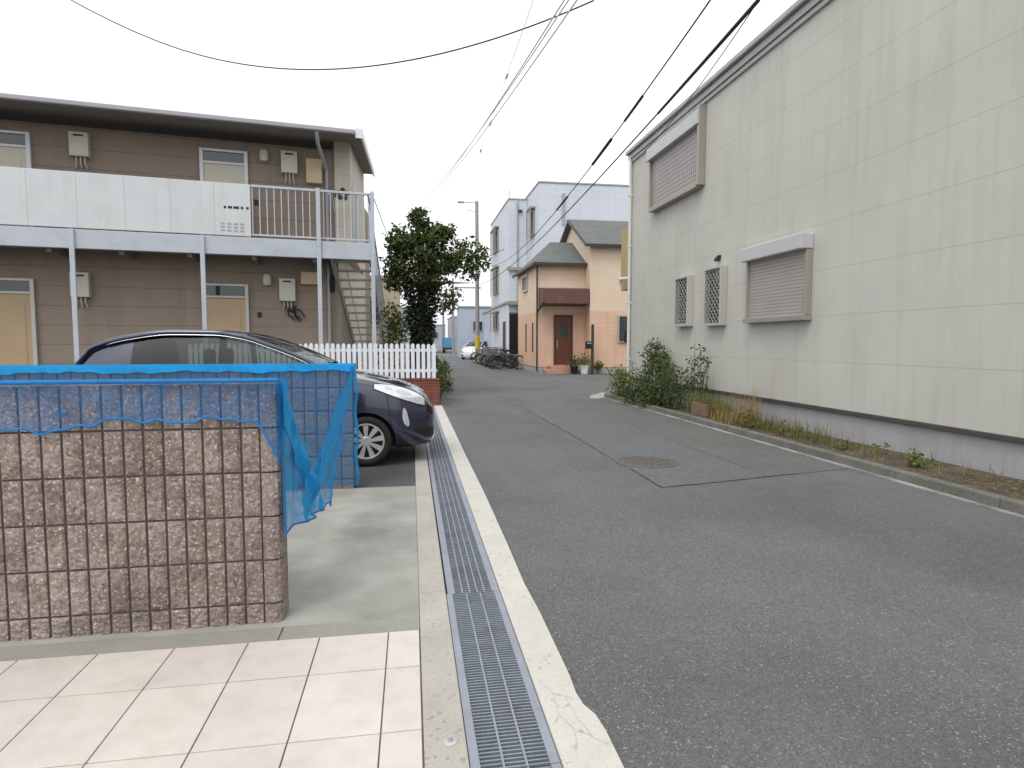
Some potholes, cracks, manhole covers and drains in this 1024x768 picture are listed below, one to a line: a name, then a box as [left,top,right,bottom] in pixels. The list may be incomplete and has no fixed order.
drain grate [446,591,560,768]
crack [538,679,609,750]
drain grate [434,424,444,437]
drain grate [431,479,474,522]
manhole cover [616,456,679,468]
drain grate [427,454,460,480]
drain grate [437,519,499,595]
drain grate [426,436,451,455]
